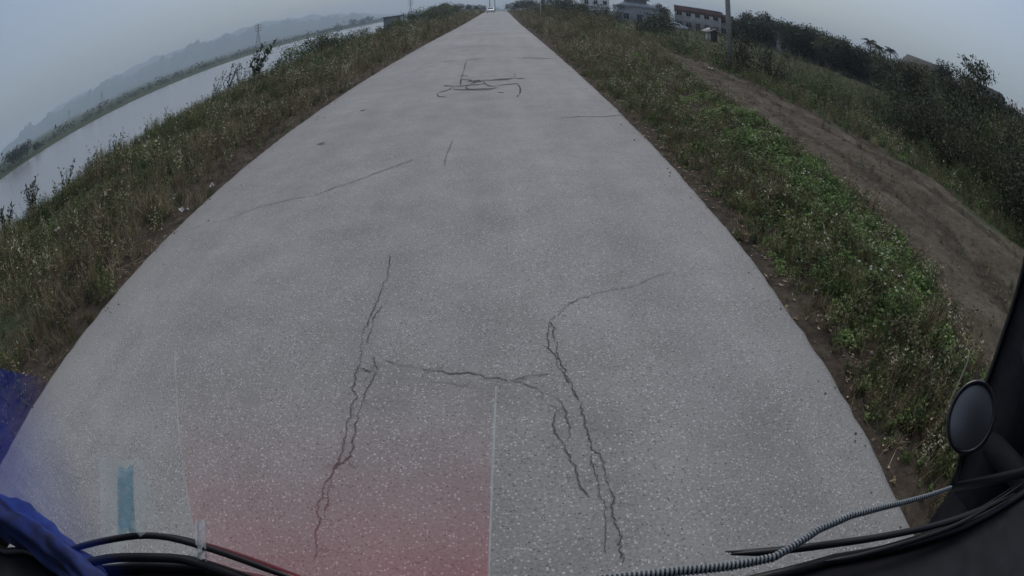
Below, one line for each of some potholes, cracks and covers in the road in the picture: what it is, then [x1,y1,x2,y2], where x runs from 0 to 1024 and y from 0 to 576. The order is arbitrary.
crack [310,254,391,558]
crack [437,46,523,97]
crack [178,159,413,232]
crack [386,272,669,565]
